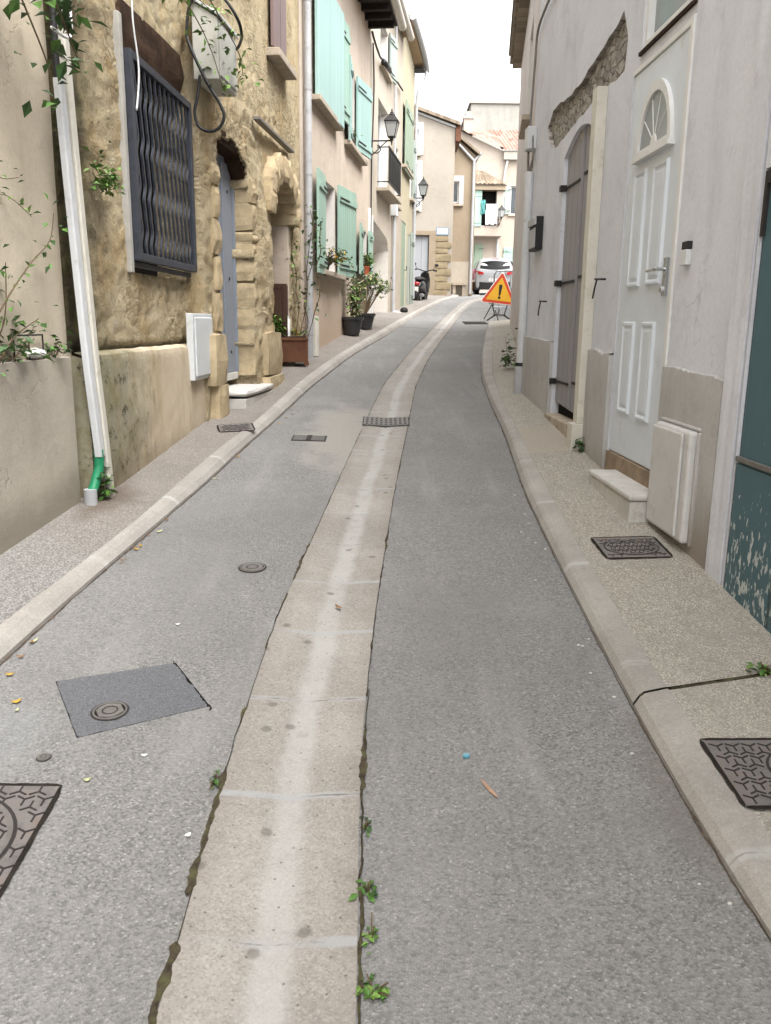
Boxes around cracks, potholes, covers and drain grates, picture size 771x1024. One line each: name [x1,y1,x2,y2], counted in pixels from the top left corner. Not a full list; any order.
manhole cover [699,738,771,809]
manhole cover [36,753,52,762]
crack [639,673,771,696]
manhole cover [0,783,62,898]
manhole cover [90,701,129,721]
manhole cover [238,562,267,573]
drain grate [362,416,410,428]
